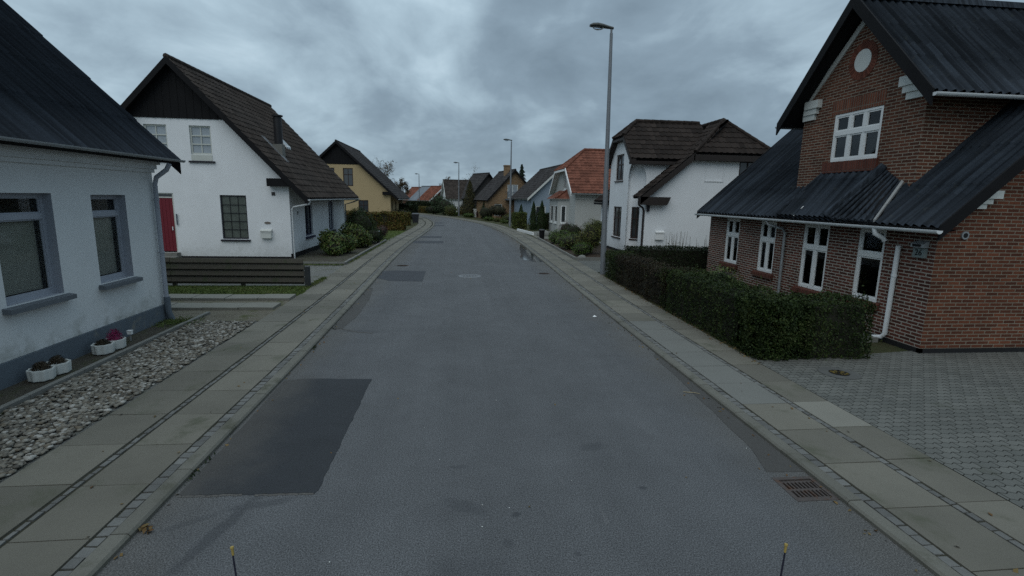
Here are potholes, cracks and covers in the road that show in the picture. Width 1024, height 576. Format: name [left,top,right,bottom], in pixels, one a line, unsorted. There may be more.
drain grate [772,476,840,501]
